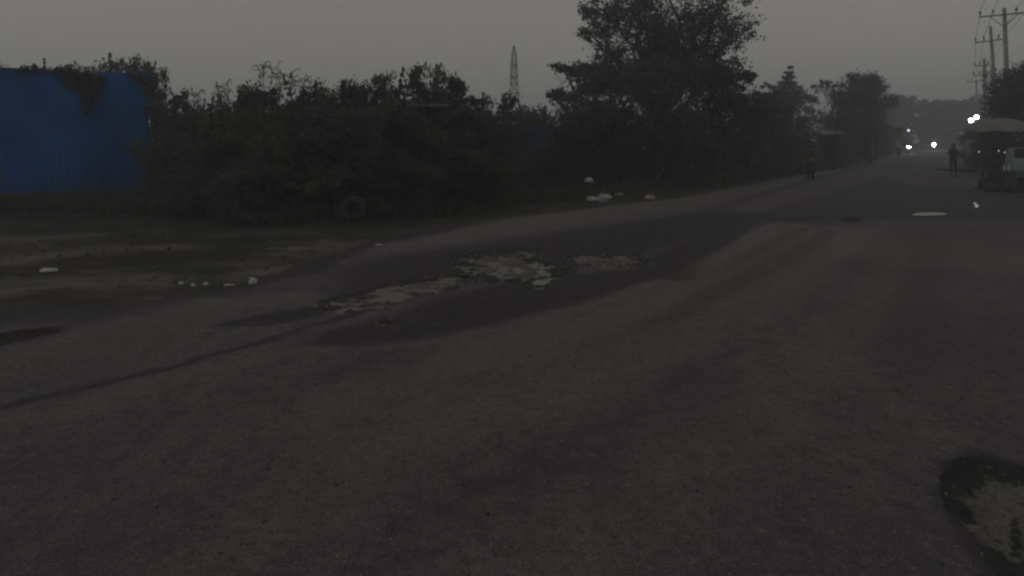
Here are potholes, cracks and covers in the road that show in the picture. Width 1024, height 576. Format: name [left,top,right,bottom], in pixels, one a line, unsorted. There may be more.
pothole [313,273,479,314]
pothole [444,247,579,289]
pothole [0,326,64,346]
pothole [939,456,1024,576]
pothole [557,250,658,268]
